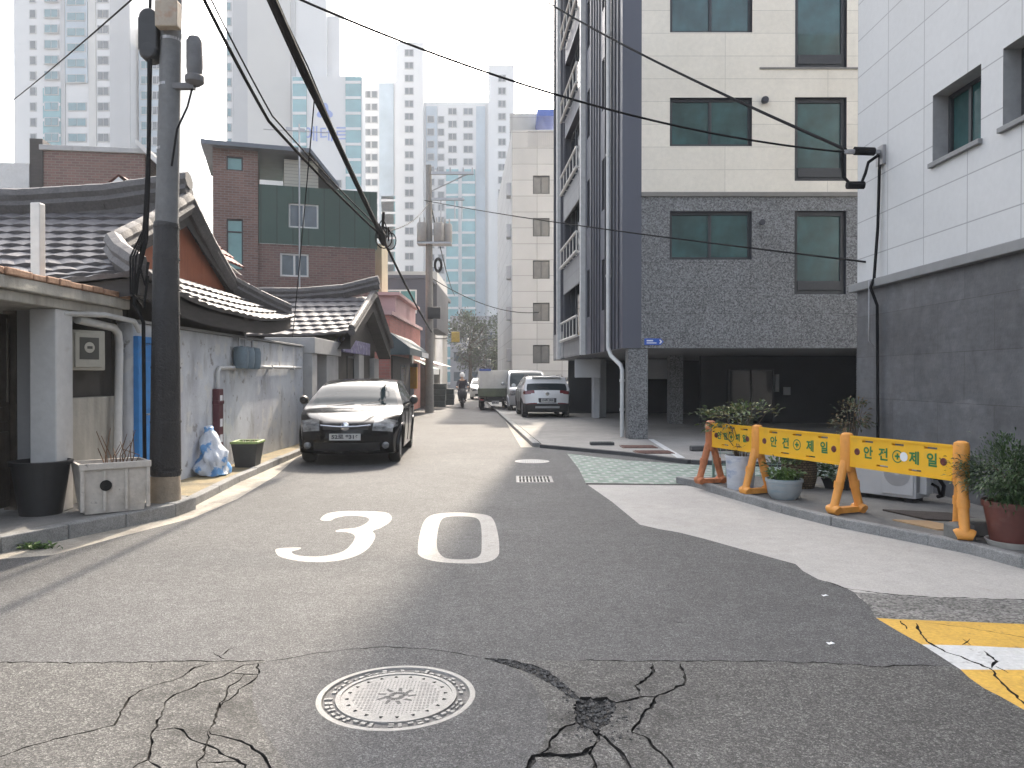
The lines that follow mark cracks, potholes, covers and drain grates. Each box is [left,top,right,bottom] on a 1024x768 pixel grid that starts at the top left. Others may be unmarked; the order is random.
crack [0,647,272,768]
manhole cover [316,666,475,731]
pothole [573,697,617,736]
crack [273,621,1024,768]
